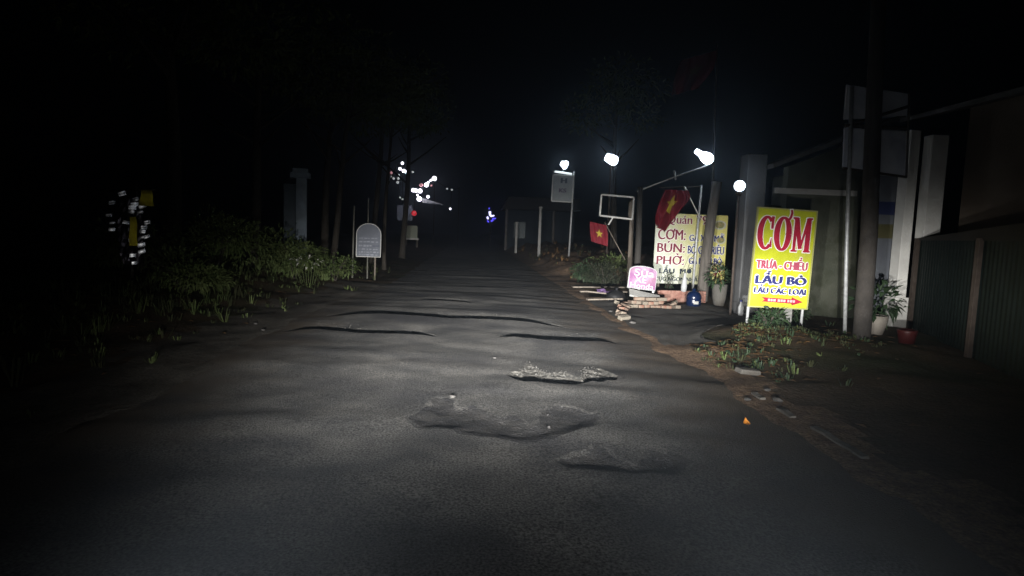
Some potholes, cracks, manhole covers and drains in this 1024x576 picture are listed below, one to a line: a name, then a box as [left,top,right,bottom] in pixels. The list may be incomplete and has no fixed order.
pothole [404,396,604,443]
pothole [549,443,695,476]
pothole [506,361,618,385]
